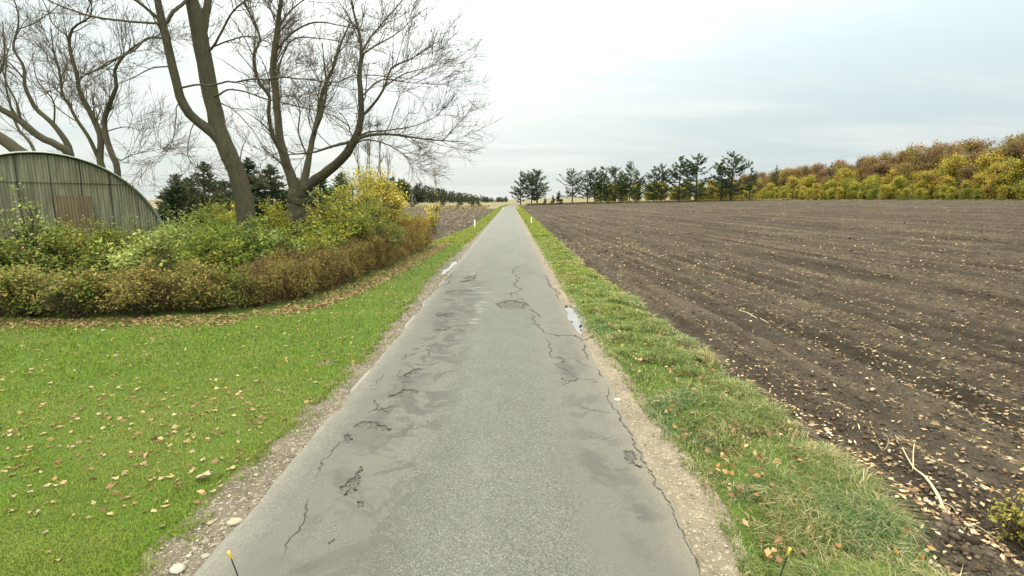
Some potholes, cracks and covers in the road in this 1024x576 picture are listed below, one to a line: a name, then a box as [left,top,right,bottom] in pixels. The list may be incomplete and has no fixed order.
pothole [388,389,418,398]
crack [368,273,470,436]
crack [508,266,701,576]
crack [315,441,344,478]
pothole [564,305,584,334]
pothole [339,468,363,496]
pothole [624,450,643,468]
pothole [354,421,393,432]
pothole [496,300,529,310]
